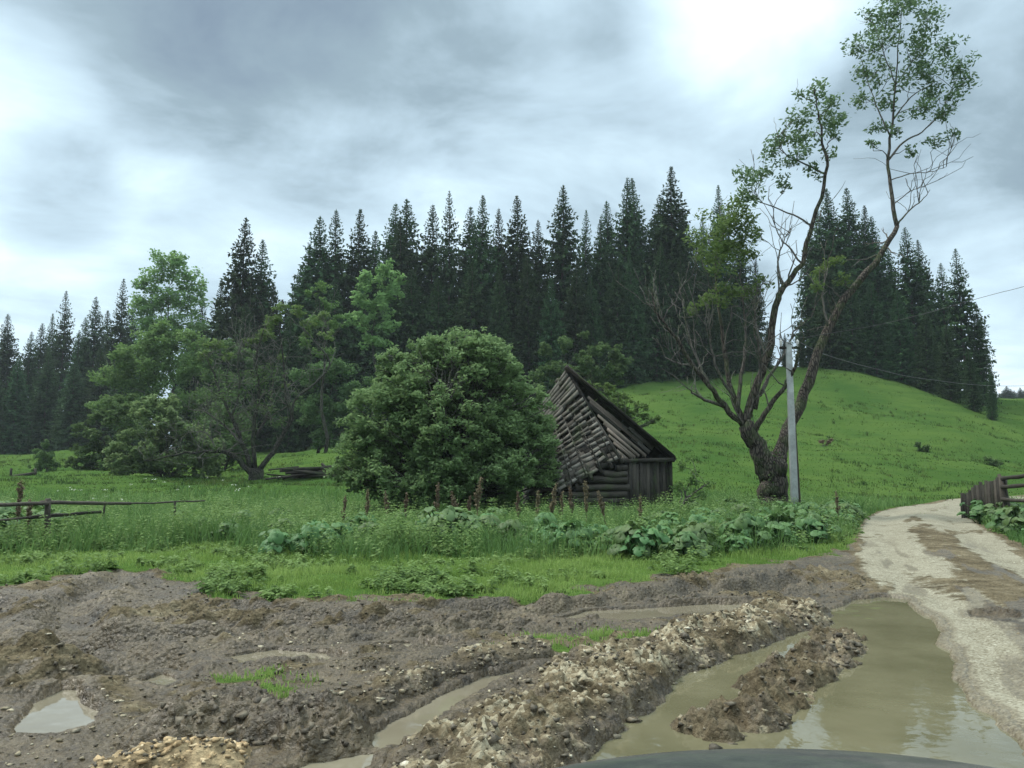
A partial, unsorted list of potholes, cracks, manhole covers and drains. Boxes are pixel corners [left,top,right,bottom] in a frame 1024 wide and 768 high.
pothole [265,660,545,768]
pothole [0,674,118,737]
pothole [587,593,1024,768]
pothole [547,595,754,621]
